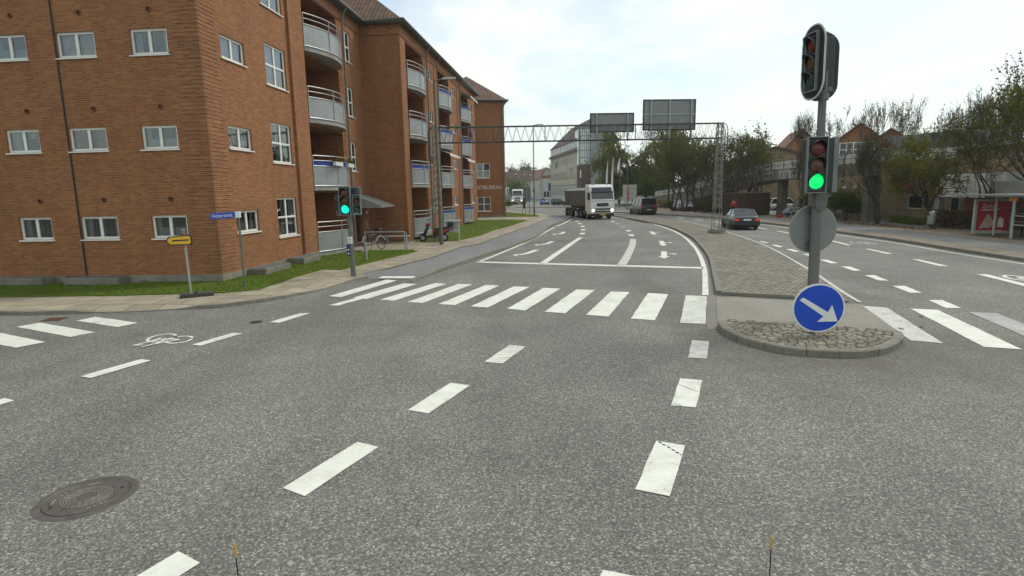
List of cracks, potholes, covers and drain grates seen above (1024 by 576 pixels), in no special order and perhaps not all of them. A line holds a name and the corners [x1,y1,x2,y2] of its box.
manhole cover [30,476,139,522]
